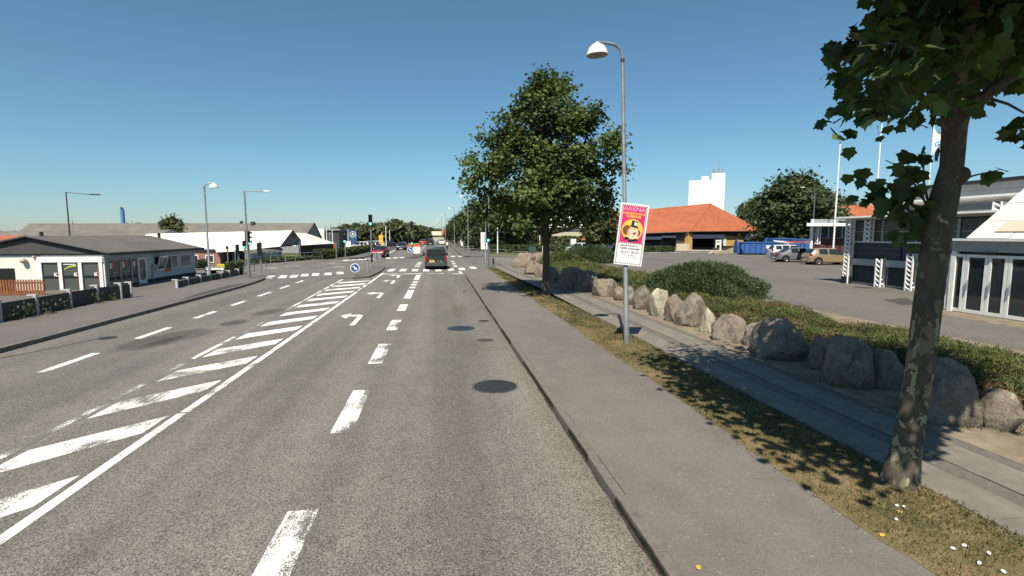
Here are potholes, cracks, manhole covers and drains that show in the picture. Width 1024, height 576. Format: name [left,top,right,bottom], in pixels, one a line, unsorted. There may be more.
manhole cover [472,380,518,394]
